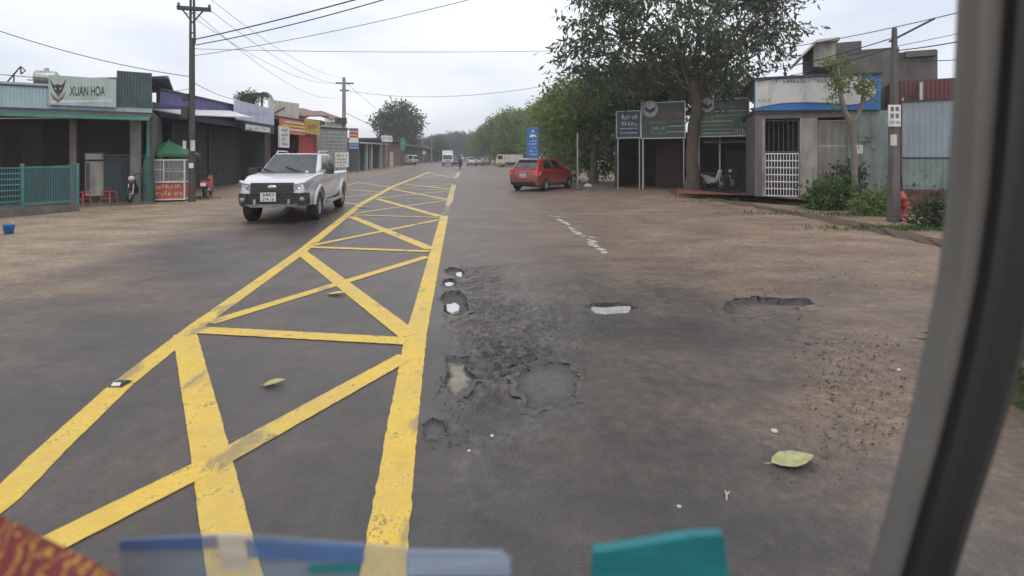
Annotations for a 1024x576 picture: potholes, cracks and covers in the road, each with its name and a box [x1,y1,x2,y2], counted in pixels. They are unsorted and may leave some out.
pothole [507,358,589,417]
pothole [442,266,467,279]
pothole [713,295,823,317]
pothole [437,287,473,319]
pothole [441,352,483,402]
pothole [580,301,645,316]
pothole [440,277,458,288]
pothole [419,416,450,441]
